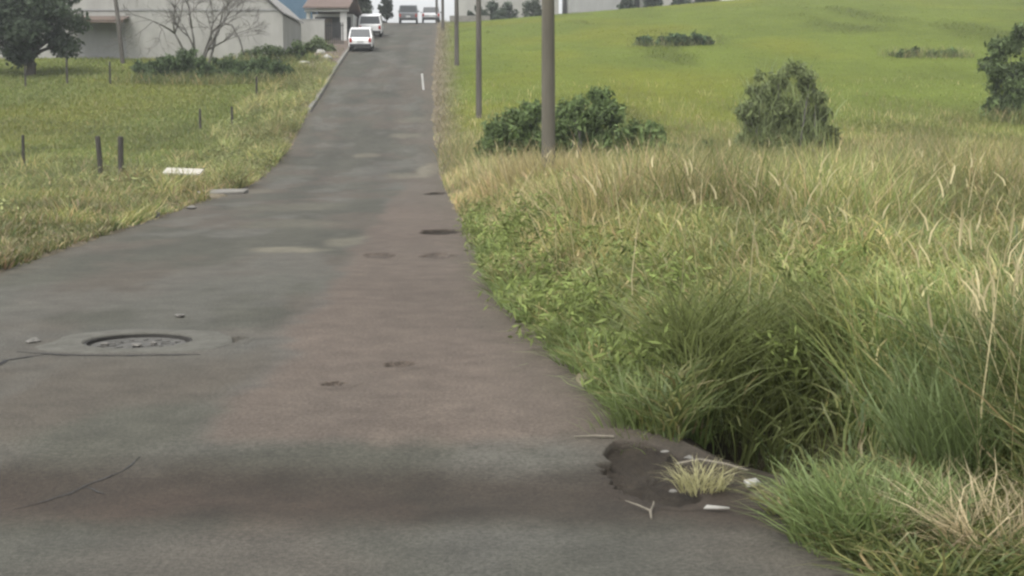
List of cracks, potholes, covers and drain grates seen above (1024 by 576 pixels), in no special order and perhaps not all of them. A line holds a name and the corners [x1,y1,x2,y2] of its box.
crack [0,351,191,365]
crack [15,456,141,509]
manhole cover [35,329,232,353]
pothole [581,436,720,511]
